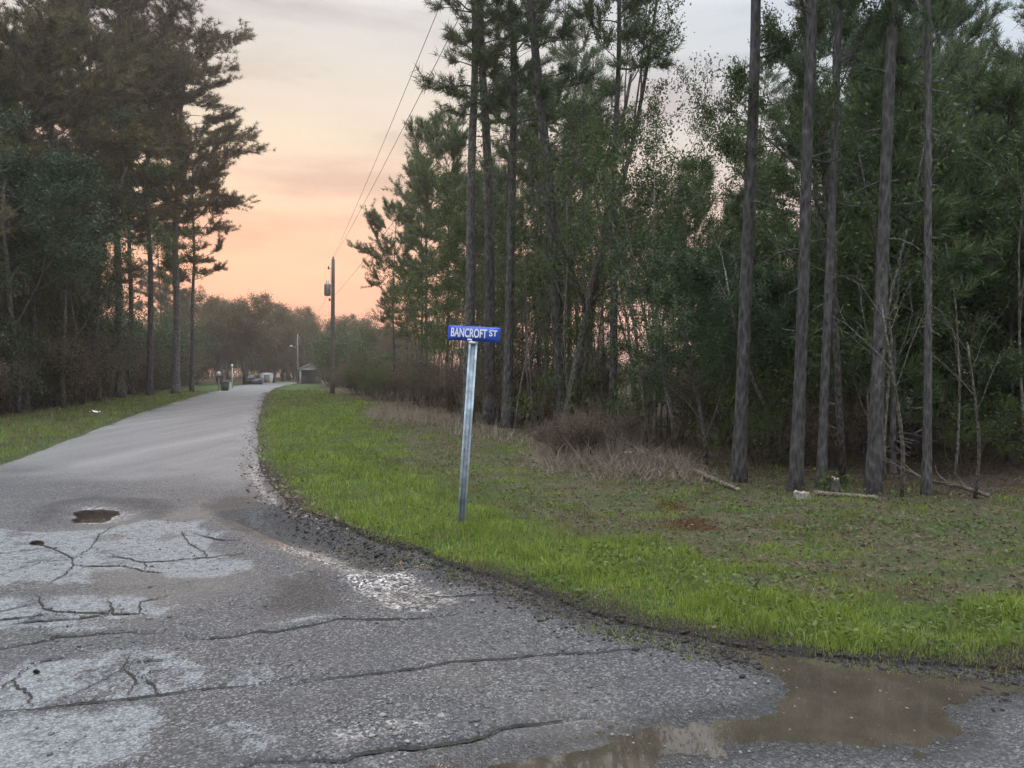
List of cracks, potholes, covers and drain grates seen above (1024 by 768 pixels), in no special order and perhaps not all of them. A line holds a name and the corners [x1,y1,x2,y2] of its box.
crack [0,591,670,712]
pothole [71,509,121,523]
crack [0,526,242,582]
crack [237,718,577,768]
